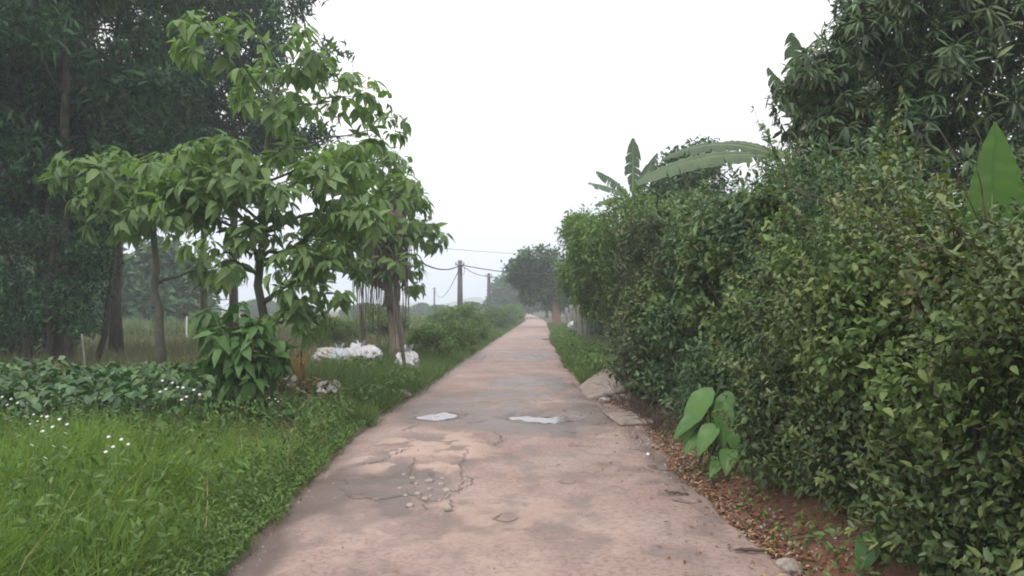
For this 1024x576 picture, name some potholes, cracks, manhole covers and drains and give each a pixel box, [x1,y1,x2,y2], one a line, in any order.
pothole [491,513,518,522]
pothole [404,470,463,501]
crack [438,420,503,506]
crack [364,449,428,509]
